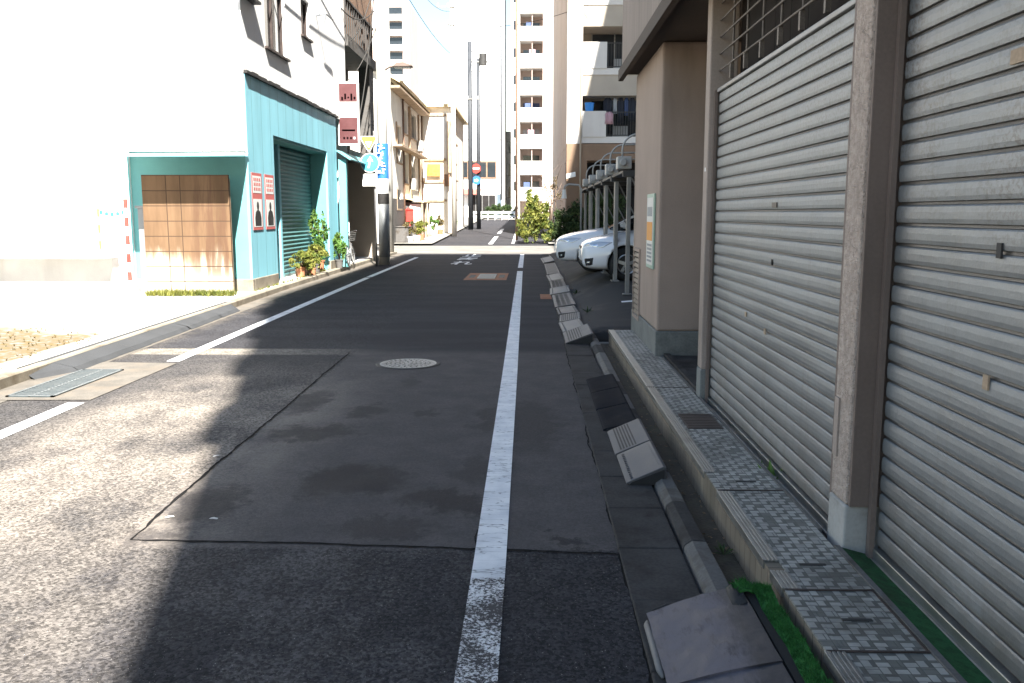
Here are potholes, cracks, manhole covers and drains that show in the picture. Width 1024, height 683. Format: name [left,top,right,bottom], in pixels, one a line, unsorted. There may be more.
drain grate [0,362,176,400]
manhole cover [375,358,441,369]
